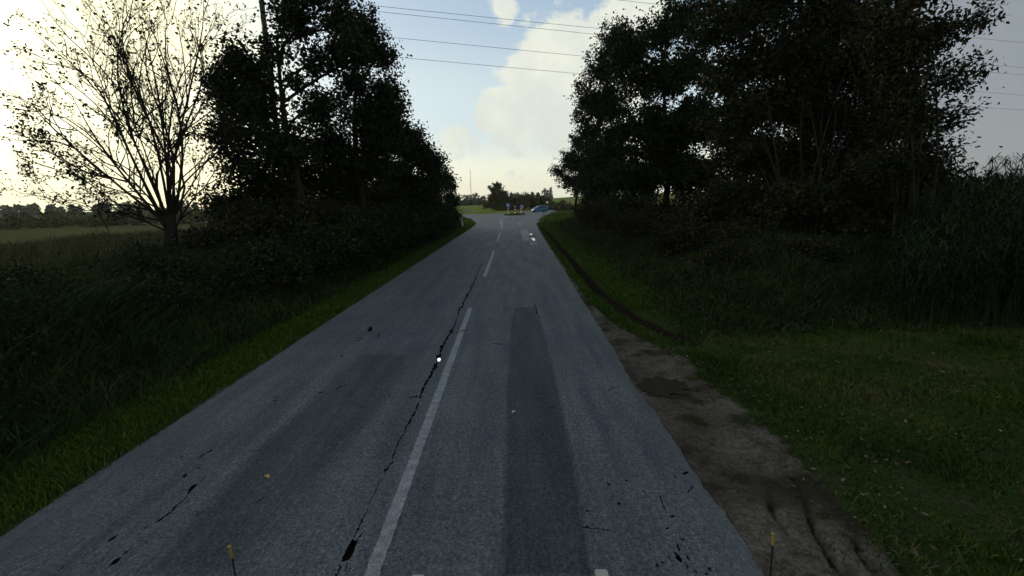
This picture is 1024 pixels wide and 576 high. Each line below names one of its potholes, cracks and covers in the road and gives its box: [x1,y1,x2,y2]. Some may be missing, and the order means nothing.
crack [123,479,205,555]
pothole [341,539,358,562]
